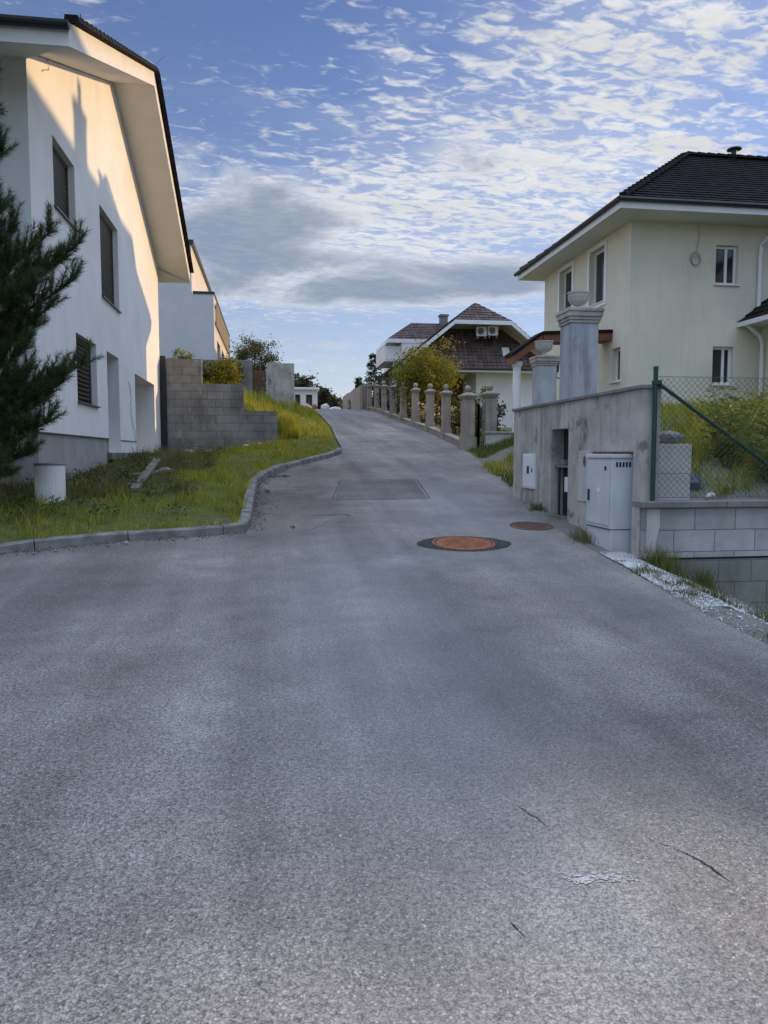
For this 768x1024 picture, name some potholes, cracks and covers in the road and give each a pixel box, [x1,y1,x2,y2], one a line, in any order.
crack [652,840,729,881]
manhole cover [417,536,511,551]
crack [517,805,548,827]
crack [258,514,351,536]
manhole cover [509,522,554,531]
